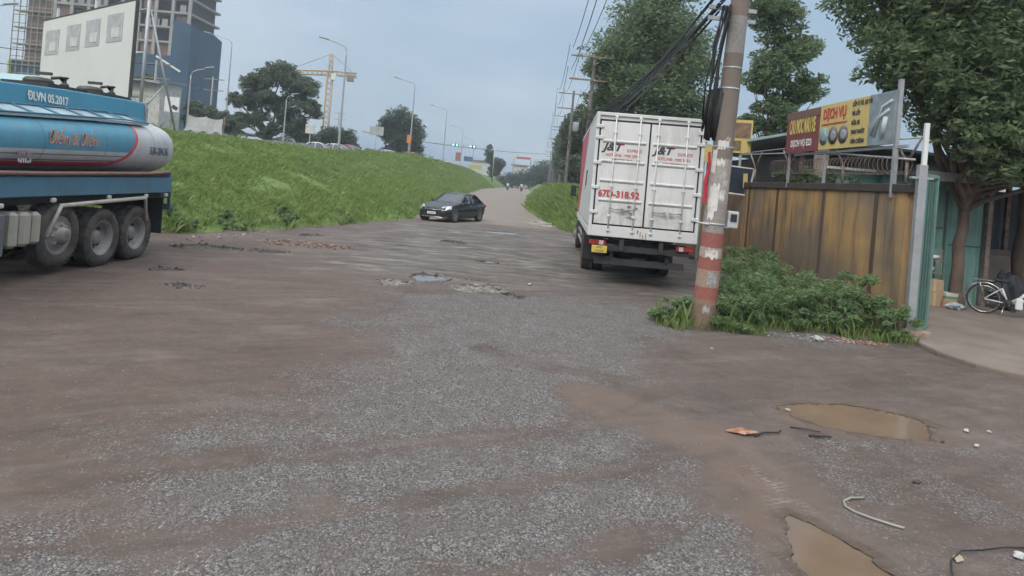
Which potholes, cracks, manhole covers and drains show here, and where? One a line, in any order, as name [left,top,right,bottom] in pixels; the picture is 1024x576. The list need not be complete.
pothole [161,281,206,289]
pothole [776,403,933,440]
pothole [448,281,510,294]
pothole [169,242,245,251]
pothole [783,514,895,576]
pothole [409,272,447,282]
pothole [376,277,420,286]
